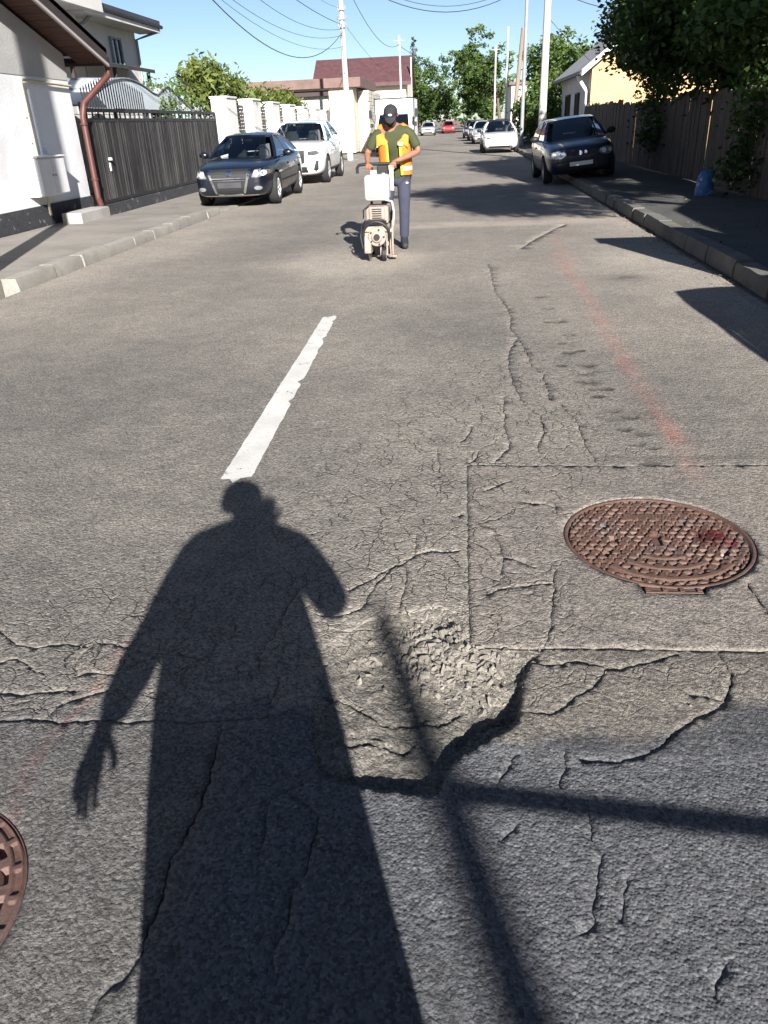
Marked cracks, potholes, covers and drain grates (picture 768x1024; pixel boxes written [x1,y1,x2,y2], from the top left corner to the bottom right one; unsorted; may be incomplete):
crack [314,541,453,617]
crack [559,656,732,781]
manhole cover [0,814,29,946]
crack [746,581,768,612]
crack [460,264,546,464]
crack [576,811,602,936]
pothole [314,607,540,795]
manhole cover [563,499,757,594]
crack [534,654,675,714]
crack [492,534,555,636]
crack [0,569,320,1024]
crack [230,778,346,976]
